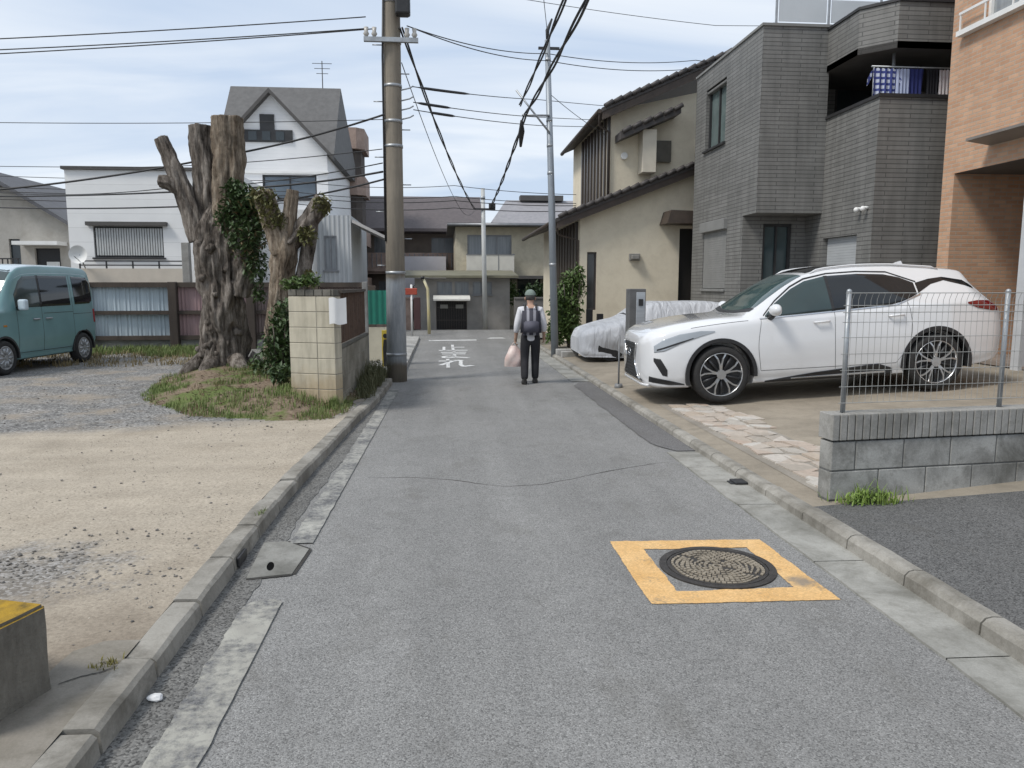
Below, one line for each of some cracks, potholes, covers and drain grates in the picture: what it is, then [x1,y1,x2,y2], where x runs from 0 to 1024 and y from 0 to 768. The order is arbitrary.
crack [368,461,673,486]
manhole cover [659,546,777,589]
